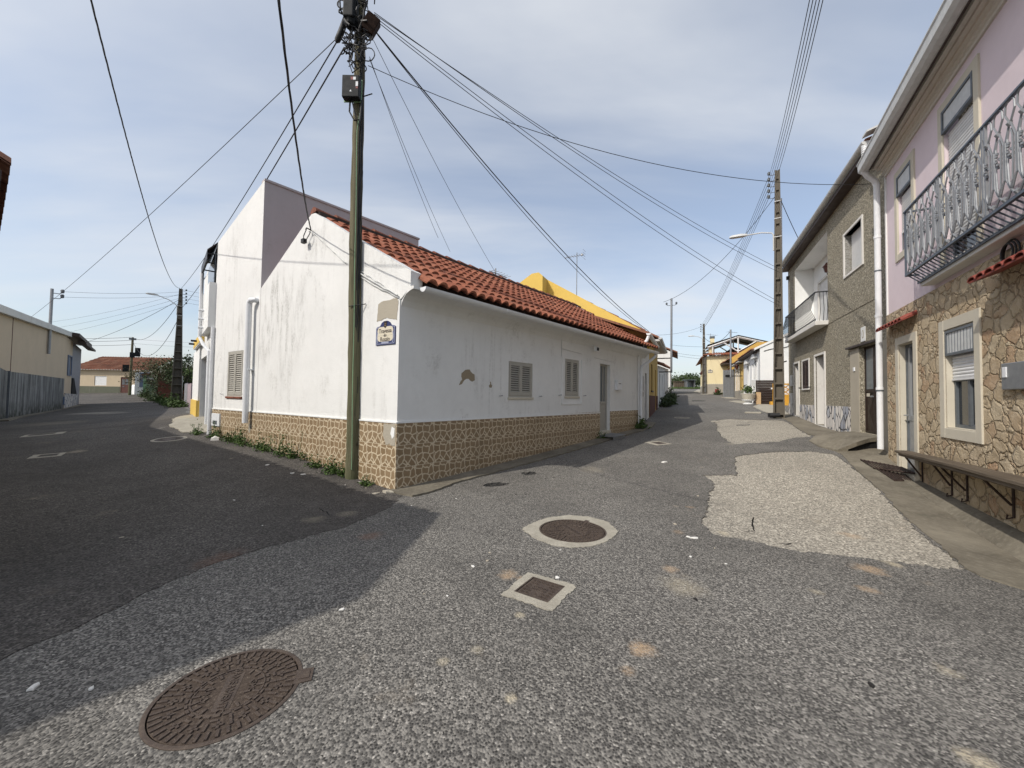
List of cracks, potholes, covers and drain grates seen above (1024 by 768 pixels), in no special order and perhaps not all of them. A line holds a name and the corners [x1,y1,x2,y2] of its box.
drain grate [860,459,915,474]
manhole cover [522,515,618,548]
manhole cover [501,572,576,611]
drain grate [877,469,911,481]
manhole cover [139,649,314,751]
